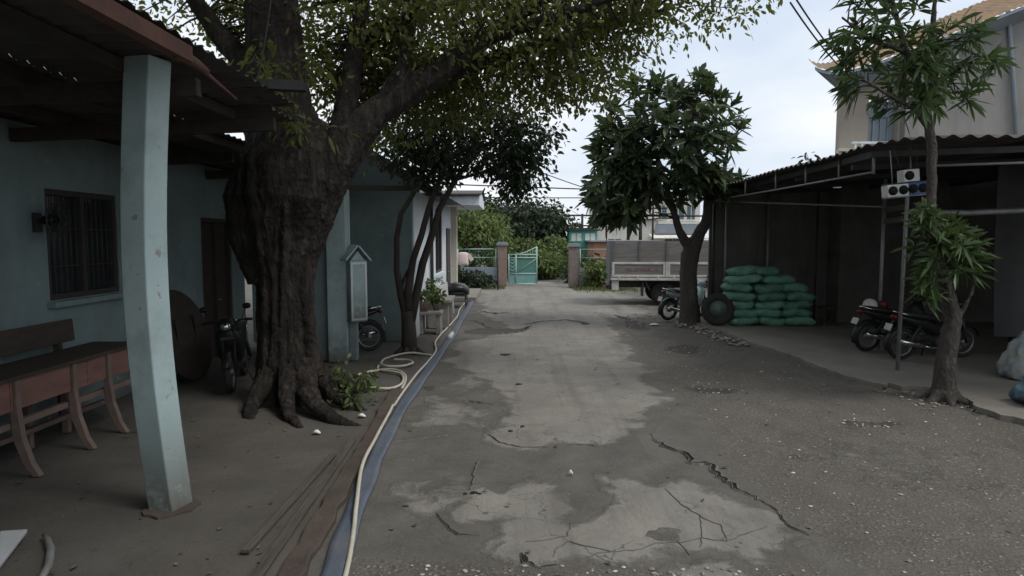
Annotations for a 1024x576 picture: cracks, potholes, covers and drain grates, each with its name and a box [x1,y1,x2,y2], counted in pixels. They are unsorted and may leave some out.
crack [436,513,480,537]
pothole [664,344,699,354]
pothole [645,527,681,542]
crack [469,311,585,334]
crack [520,415,809,569]
crack [468,434,607,490]
pothole [683,386,738,394]
